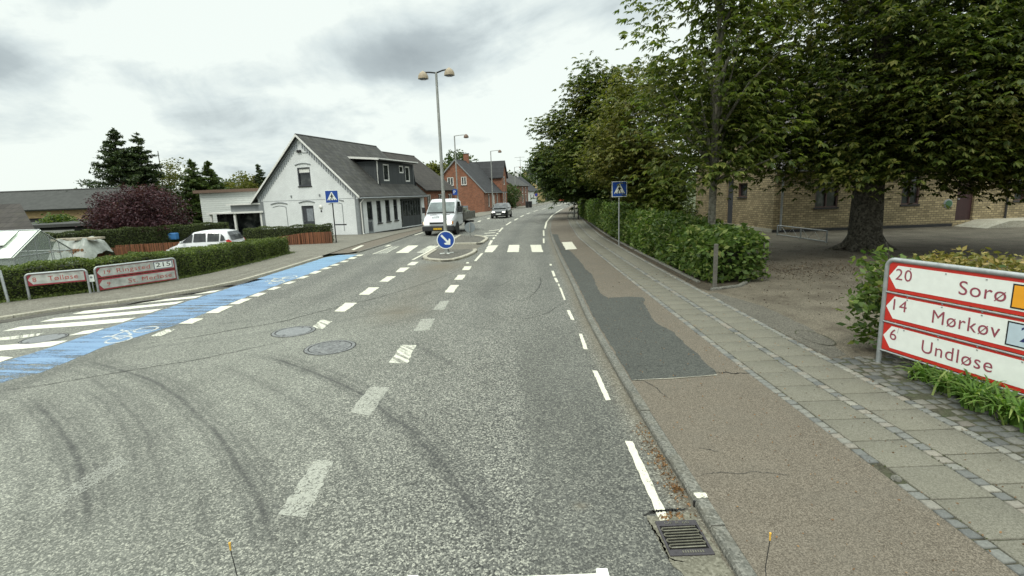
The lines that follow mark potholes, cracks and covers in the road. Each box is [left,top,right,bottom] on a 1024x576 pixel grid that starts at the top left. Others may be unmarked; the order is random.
manhole cover [303,340,356,355]
manhole cover [271,326,316,337]
drain grate [655,520,715,557]
manhole cover [18,333,69,344]
